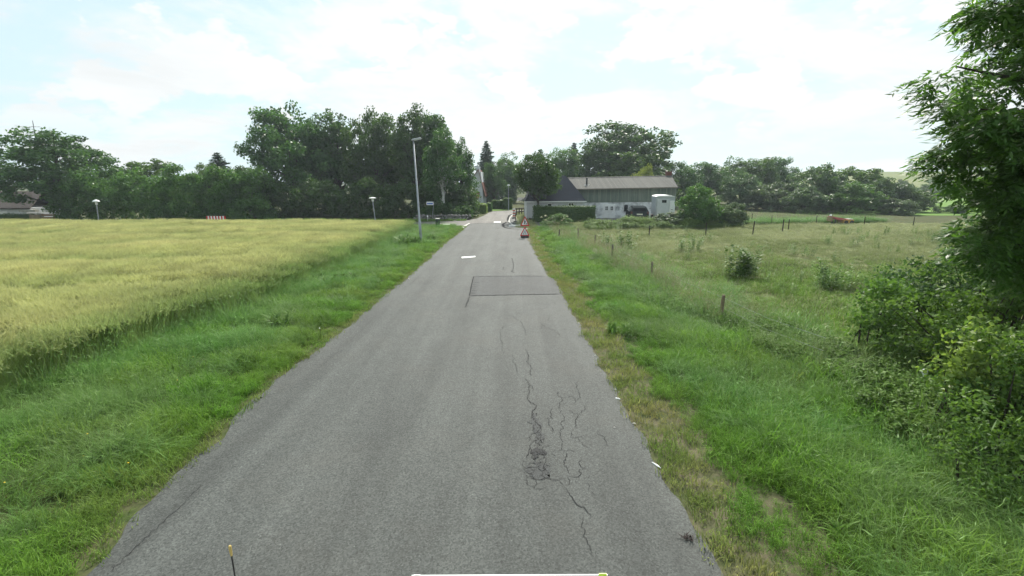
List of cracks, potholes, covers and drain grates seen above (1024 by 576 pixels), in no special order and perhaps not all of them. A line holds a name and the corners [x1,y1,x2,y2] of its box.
pothole [530,447,547,460]
crack [500,315,607,557]
crack [110,485,201,572]
